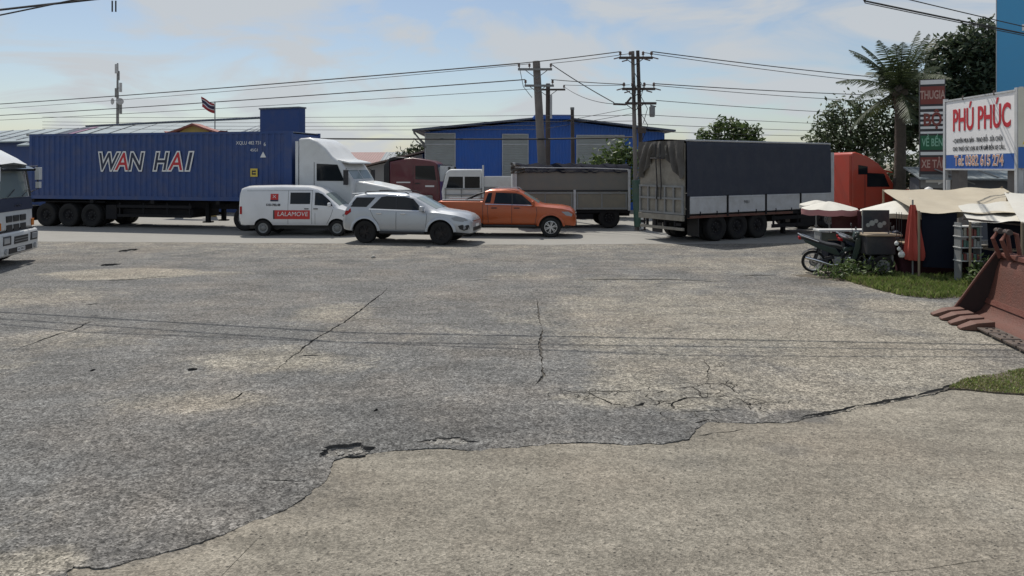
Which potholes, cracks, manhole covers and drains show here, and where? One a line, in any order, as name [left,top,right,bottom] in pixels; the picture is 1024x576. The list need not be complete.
crack [803,384,951,417]
crack [548,360,790,436]
pothole [319,442,376,458]
crack [23,303,99,347]
